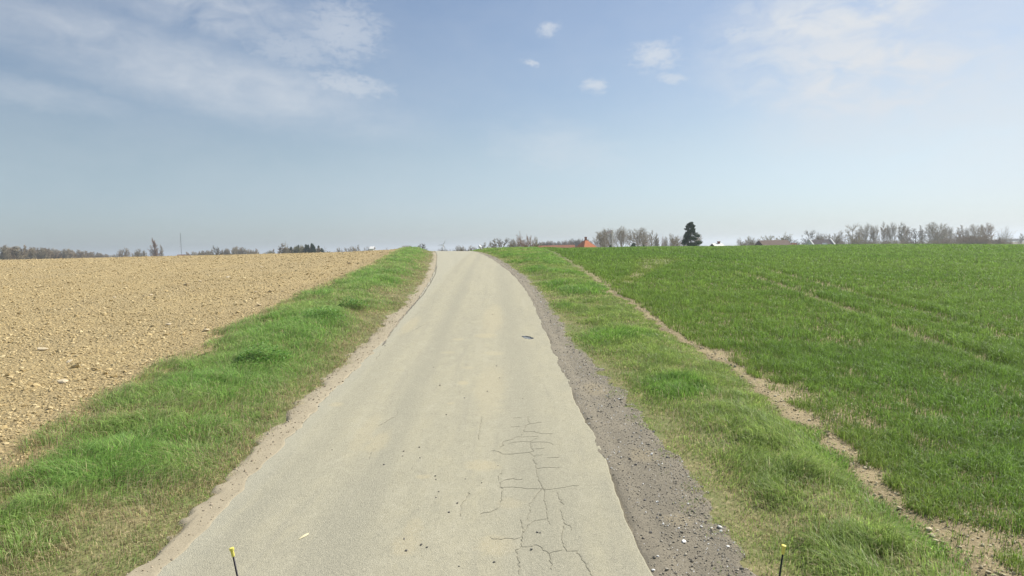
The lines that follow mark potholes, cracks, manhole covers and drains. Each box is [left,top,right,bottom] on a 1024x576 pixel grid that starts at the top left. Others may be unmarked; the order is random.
crack [484,422,591,573]
